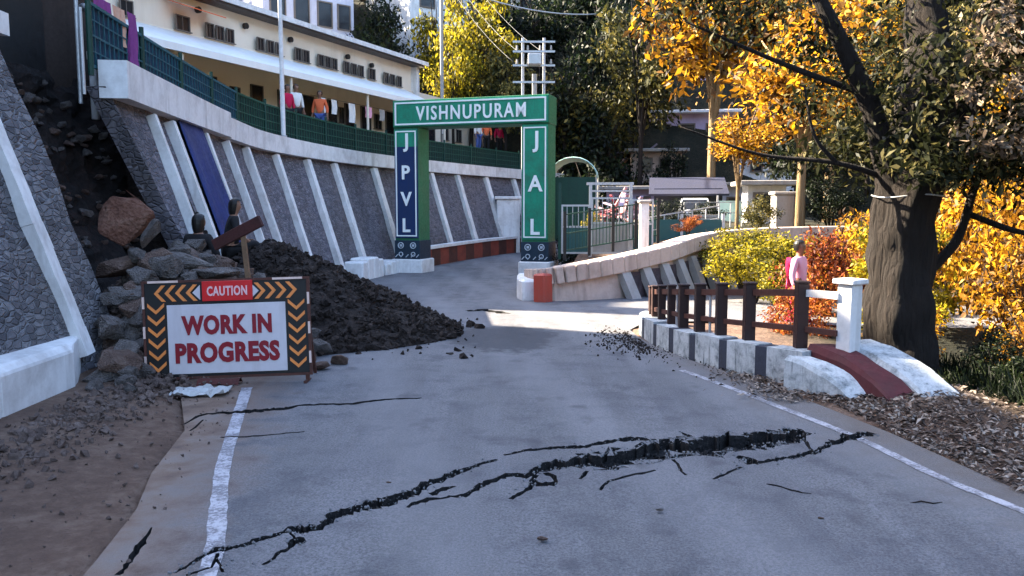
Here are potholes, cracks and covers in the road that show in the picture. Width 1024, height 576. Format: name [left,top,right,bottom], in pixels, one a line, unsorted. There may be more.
crack [115,398,880,576]
